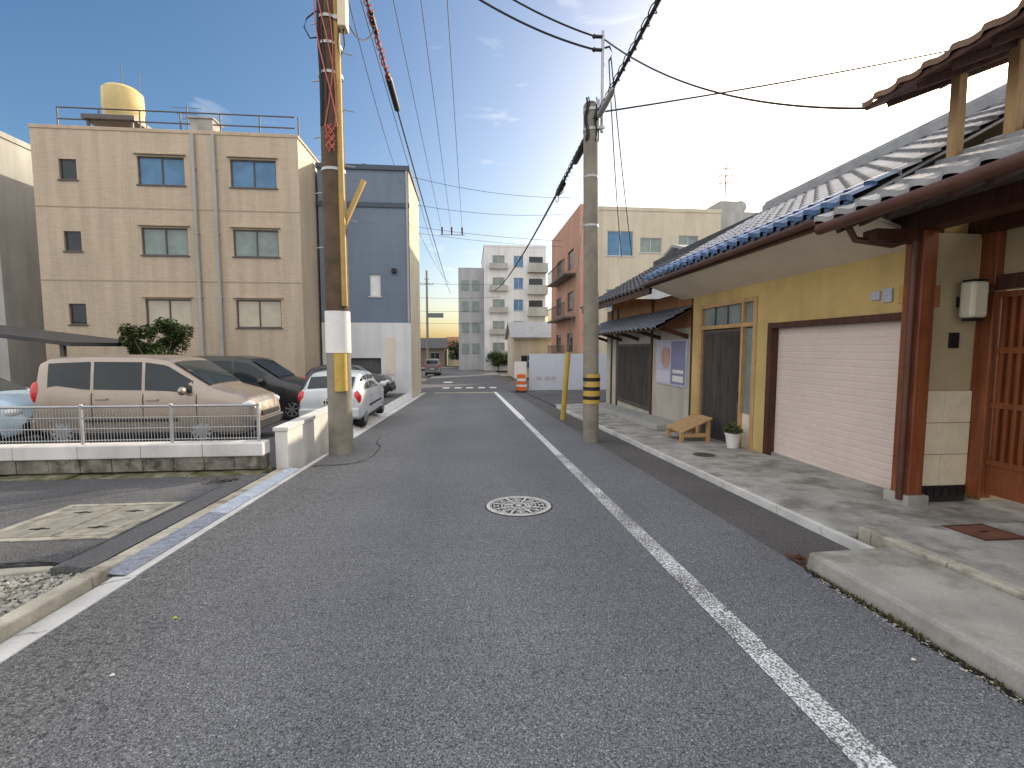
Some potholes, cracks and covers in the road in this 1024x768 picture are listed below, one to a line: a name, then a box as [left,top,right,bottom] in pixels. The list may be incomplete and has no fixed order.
manhole cover [485,496,553,517]
manhole cover [0,501,185,542]
